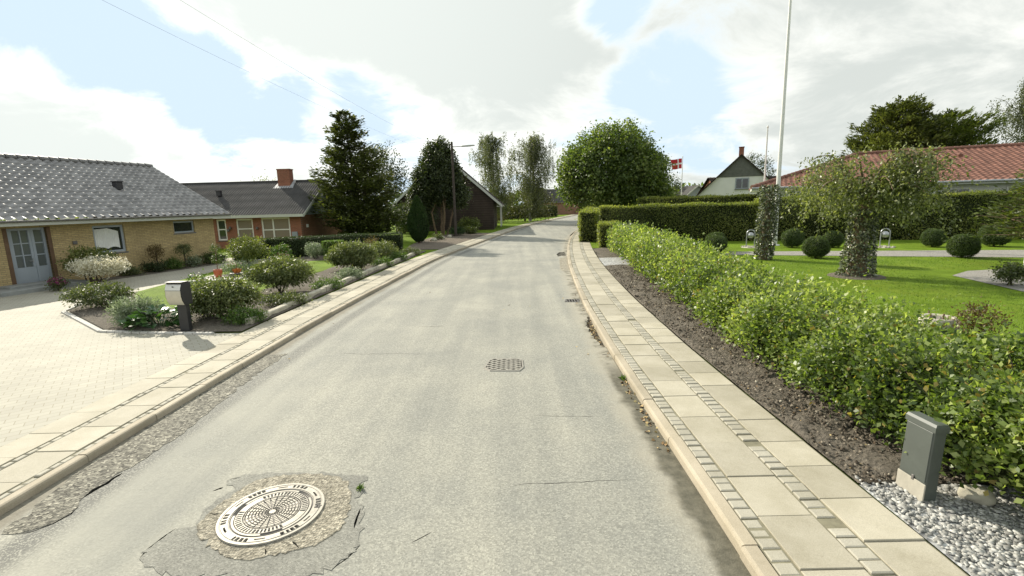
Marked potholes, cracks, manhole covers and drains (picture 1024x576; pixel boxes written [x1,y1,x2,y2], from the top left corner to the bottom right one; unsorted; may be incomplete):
crack [16,473,122,535]
manhole cover [196,473,352,561]
